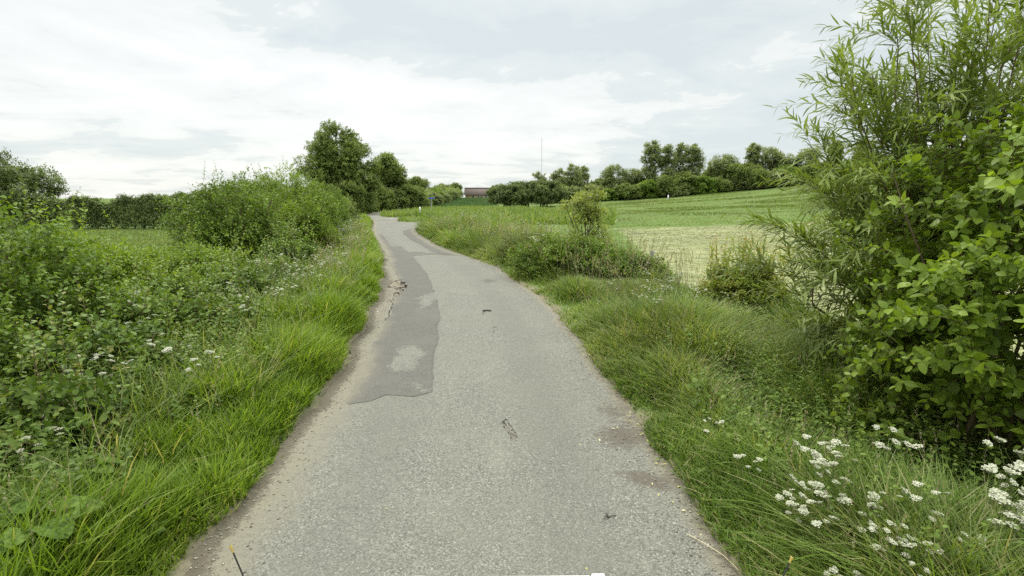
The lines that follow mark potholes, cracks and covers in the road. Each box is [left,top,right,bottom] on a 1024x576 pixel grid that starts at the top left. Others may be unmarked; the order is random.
pothole [388,279,408,291]
pothole [502,418,518,442]
